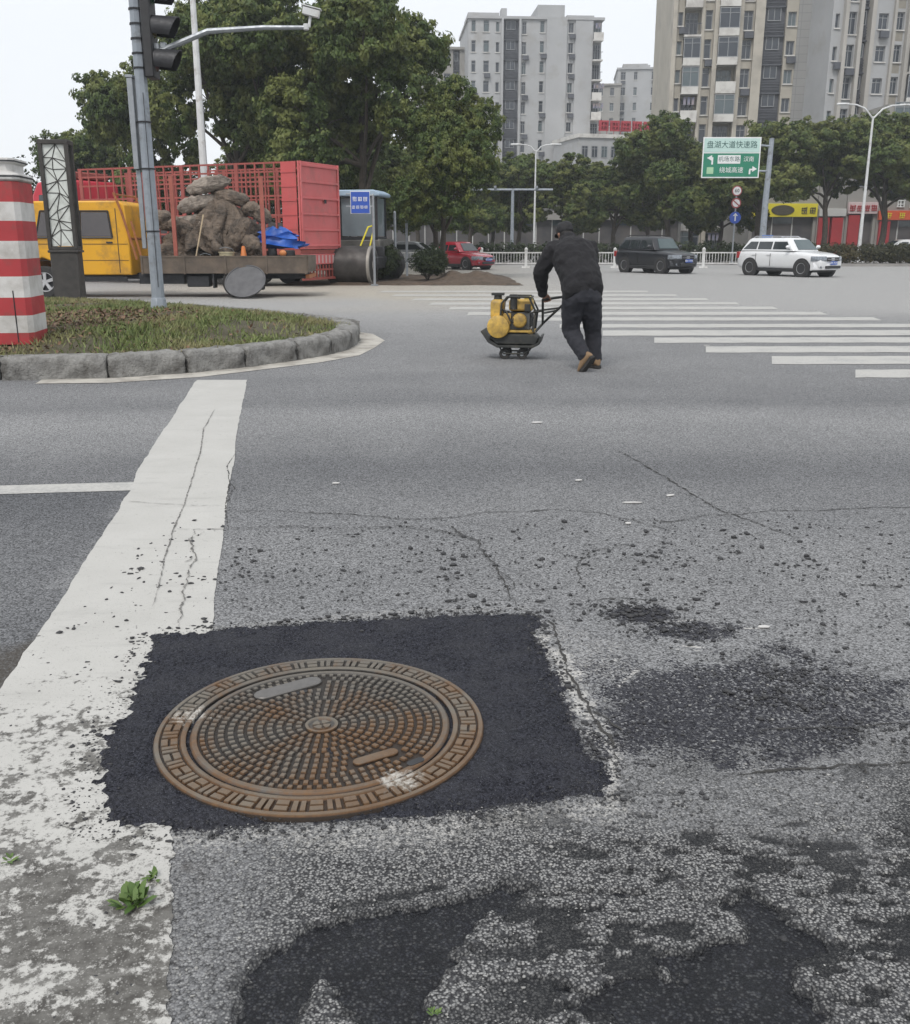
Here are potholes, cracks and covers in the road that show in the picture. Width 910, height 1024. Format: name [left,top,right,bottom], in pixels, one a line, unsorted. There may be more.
crack [178,531,197,624]
crack [715,761,910,775]
manhole cover [153,658,484,823]
crack [212,448,895,760]
